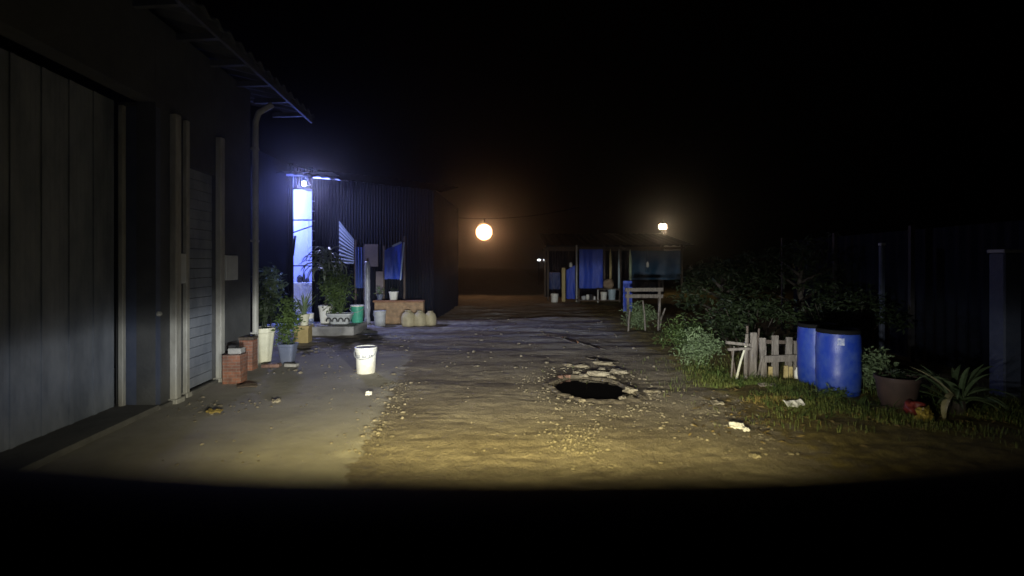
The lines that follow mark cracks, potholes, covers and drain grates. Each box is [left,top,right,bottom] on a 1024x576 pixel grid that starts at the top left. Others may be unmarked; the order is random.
crack [547,334,619,363]
pothole [542,374,648,404]
